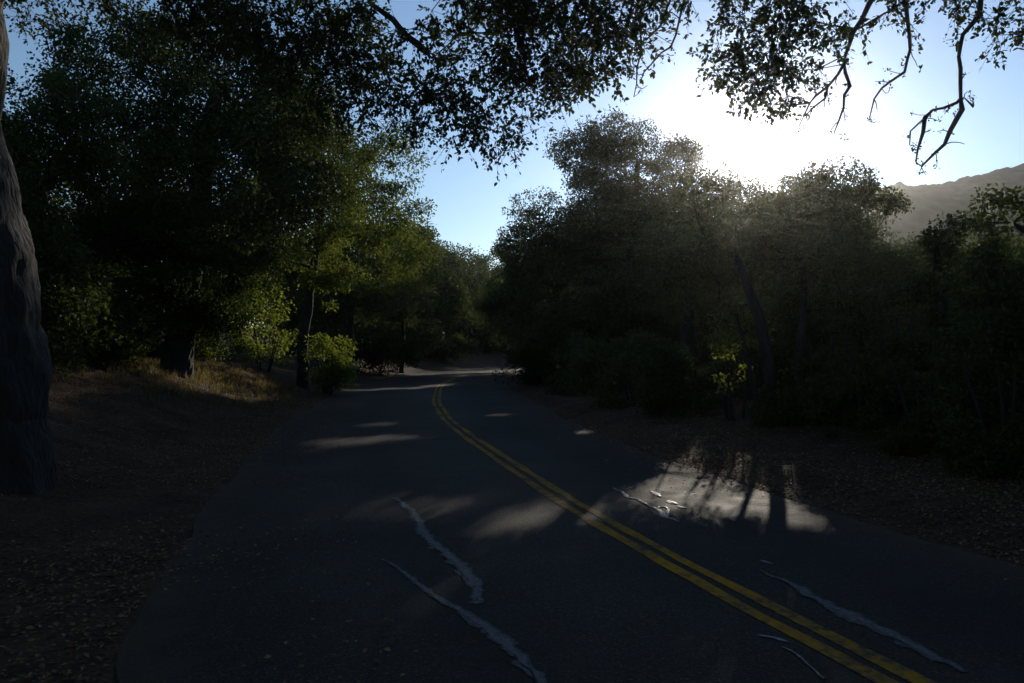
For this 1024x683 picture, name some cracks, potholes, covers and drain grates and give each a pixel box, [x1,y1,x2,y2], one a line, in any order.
crack [613,485,686,522]
crack [757,635,824,679]
